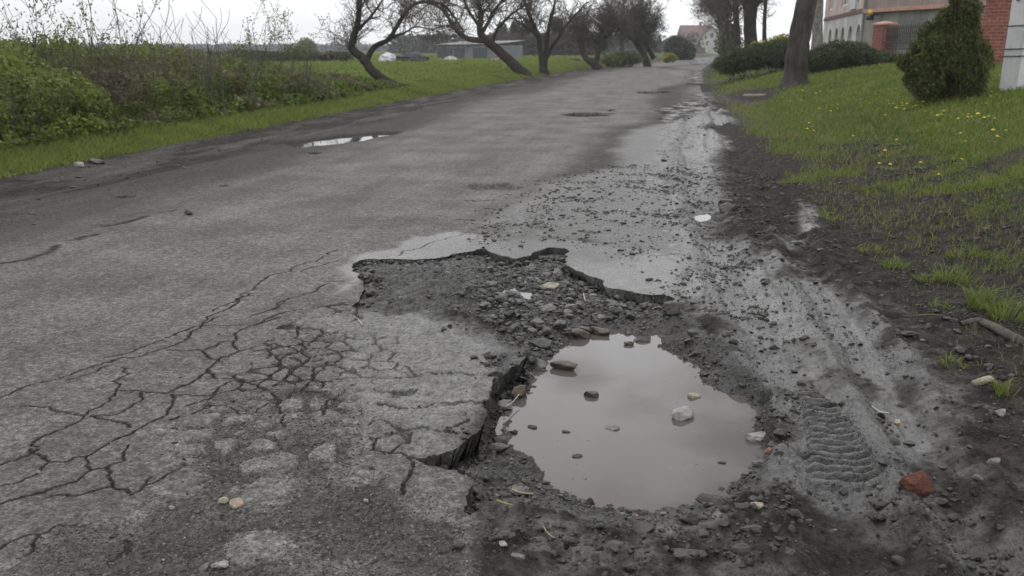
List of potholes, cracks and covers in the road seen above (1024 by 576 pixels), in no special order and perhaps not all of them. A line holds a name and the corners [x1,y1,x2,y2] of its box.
crack [0,249,487,562]
crack [0,216,149,264]
pothole [350,247,787,535]
